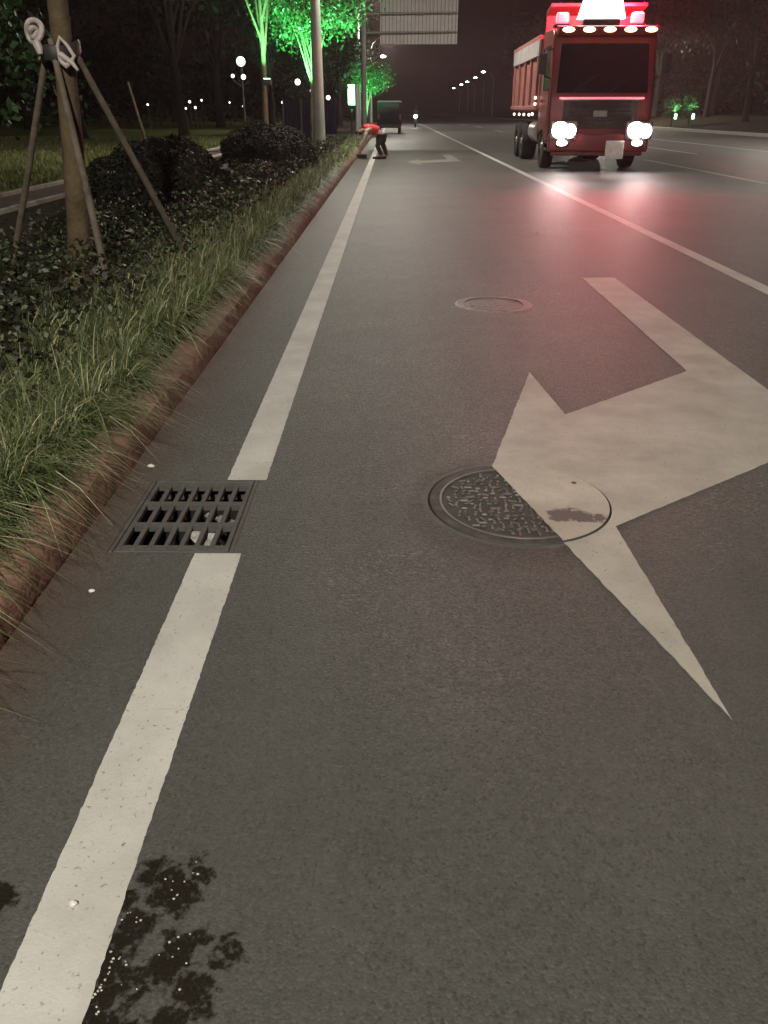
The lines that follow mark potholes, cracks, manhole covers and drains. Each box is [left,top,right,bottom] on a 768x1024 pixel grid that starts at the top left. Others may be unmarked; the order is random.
manhole cover [455,296,533,313]
manhole cover [422,463,612,549]
drain grate [108,481,259,553]
